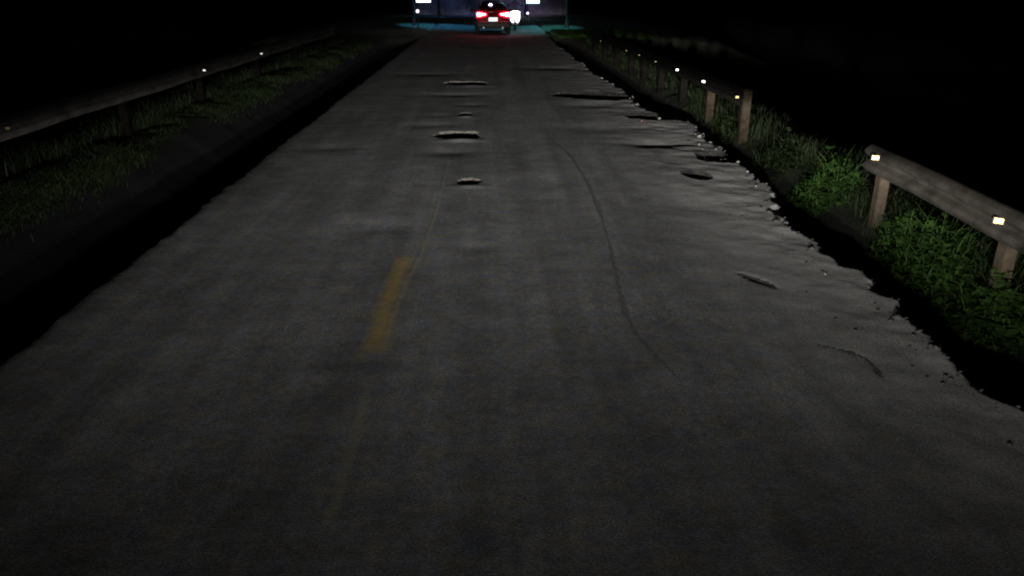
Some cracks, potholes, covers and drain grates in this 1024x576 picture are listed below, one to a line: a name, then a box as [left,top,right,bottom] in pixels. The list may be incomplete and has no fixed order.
pothole [694,151,728,163]
pothole [623,113,665,121]
pothole [431,131,483,139]
pothole [680,169,713,180]
pothole [550,91,634,102]
crack [546,134,679,378]
